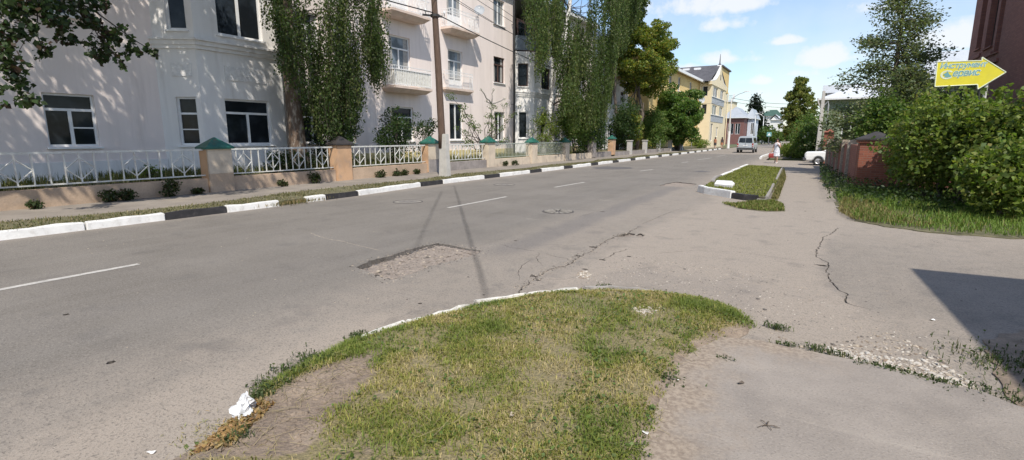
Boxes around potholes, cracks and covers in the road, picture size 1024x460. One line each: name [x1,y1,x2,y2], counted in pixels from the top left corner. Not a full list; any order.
crack [815,229,868,309]
pothole [356,243,480,280]
